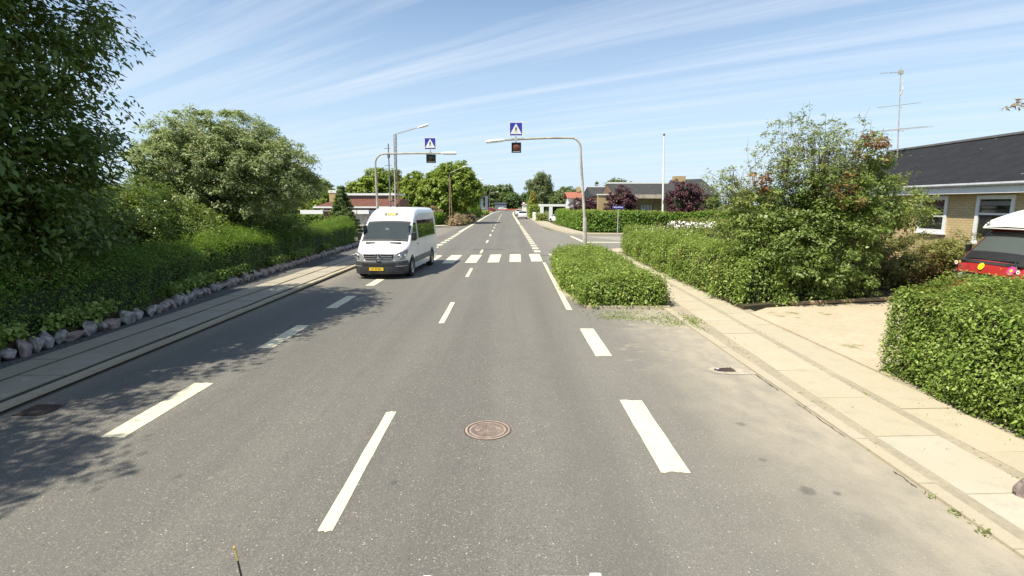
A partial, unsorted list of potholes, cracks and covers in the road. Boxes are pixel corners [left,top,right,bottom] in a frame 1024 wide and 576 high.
drain grate [707,366,756,374]
manhole cover [464,420,511,440]
drain grate [12,404,67,416]
